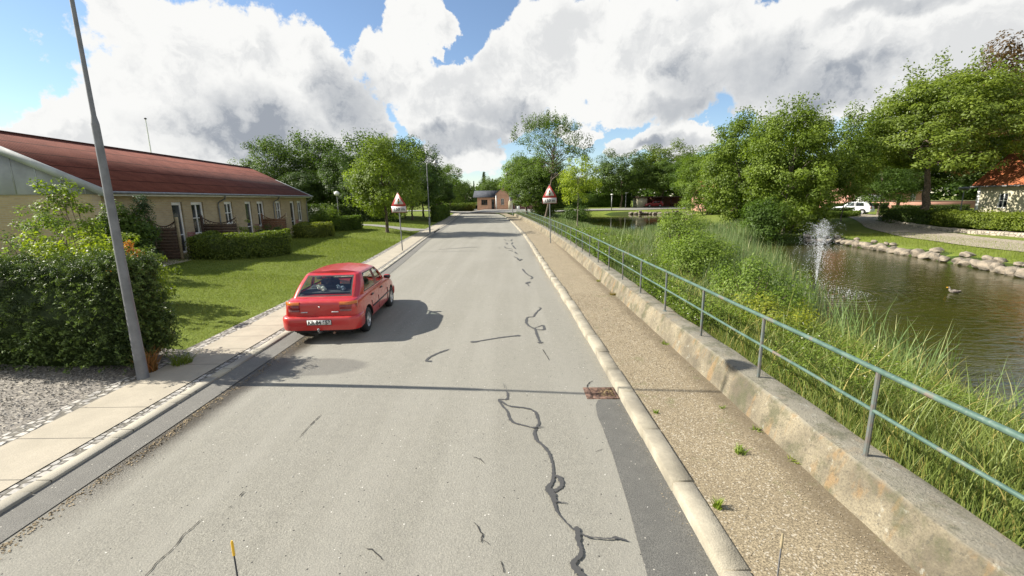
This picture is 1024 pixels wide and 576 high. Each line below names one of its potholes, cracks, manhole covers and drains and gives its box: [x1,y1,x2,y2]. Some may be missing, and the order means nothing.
crack [145,492,243,576]
drain grate [583,387,620,399]
